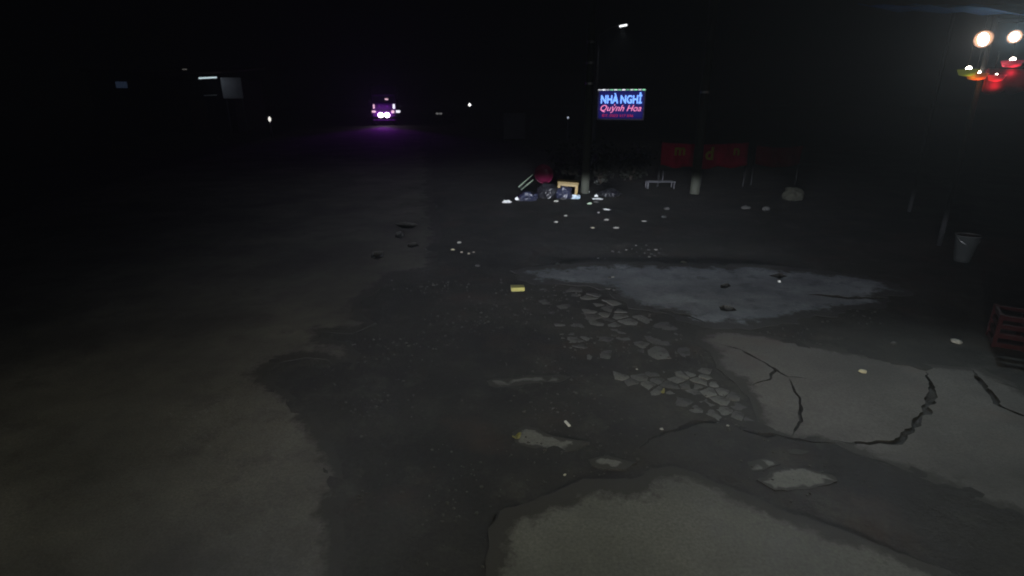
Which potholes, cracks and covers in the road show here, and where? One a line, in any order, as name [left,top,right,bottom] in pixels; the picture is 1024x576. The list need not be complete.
crack [636,347,826,450]
crack [975,376,1024,416]
crack [854,375,938,445]
